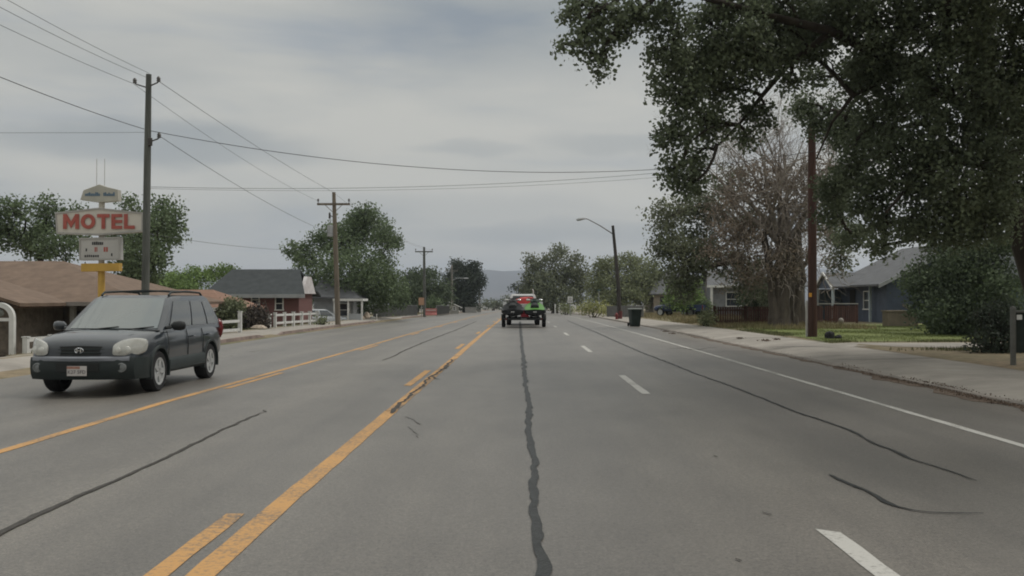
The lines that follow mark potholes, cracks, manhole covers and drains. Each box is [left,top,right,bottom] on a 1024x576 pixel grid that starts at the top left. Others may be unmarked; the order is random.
crack [390,359,453,437]
